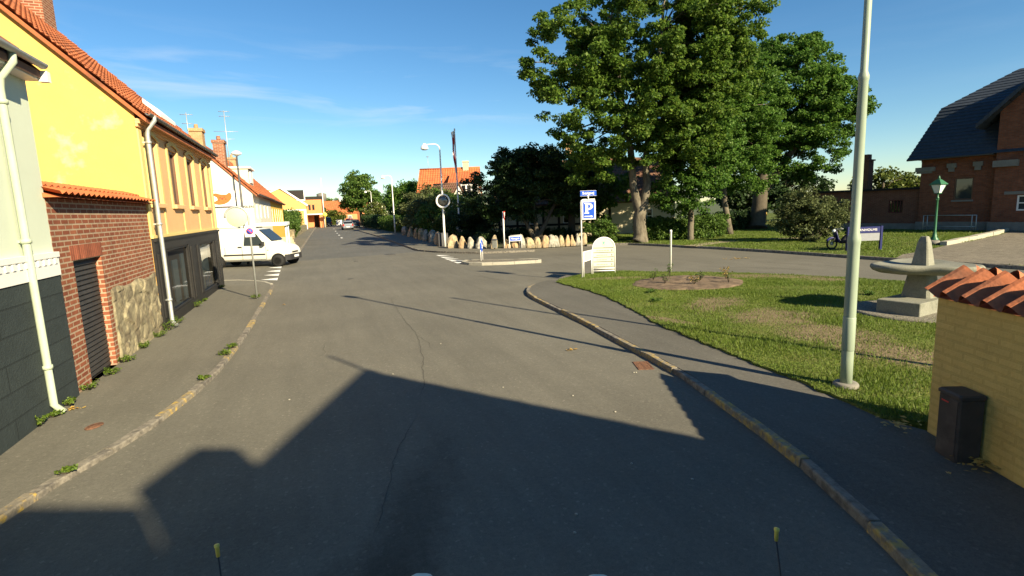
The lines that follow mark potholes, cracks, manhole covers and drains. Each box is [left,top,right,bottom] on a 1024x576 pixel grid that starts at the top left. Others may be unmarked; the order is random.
crack [392,302,430,395]
crack [373,415,419,538]
drain grate [633,361,654,370]
